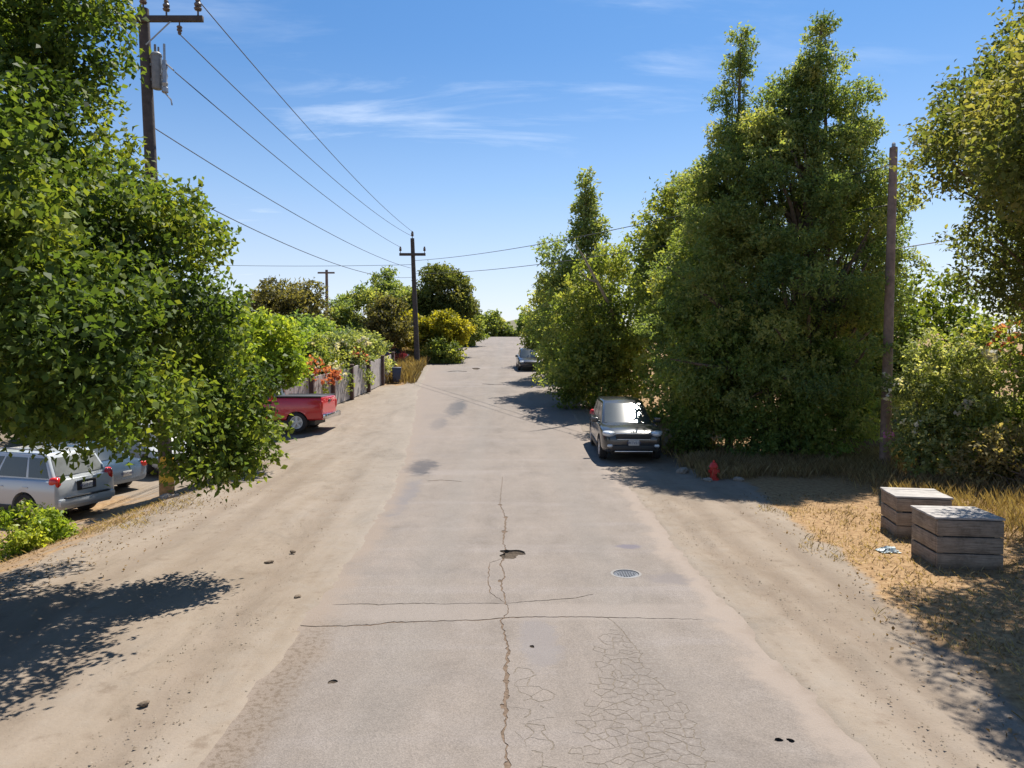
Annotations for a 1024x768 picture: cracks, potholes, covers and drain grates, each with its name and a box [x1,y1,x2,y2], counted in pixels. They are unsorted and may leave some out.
pothole [500,550,525,559]
manhole cover [610,569,642,578]
crack [300,478,715,768]
